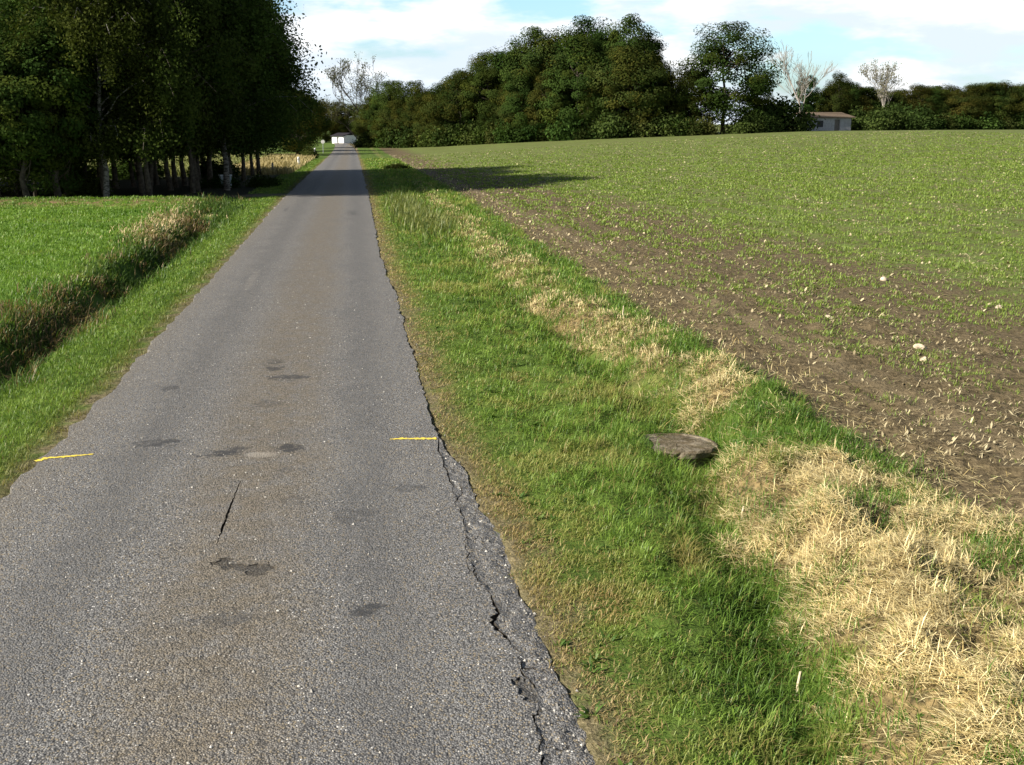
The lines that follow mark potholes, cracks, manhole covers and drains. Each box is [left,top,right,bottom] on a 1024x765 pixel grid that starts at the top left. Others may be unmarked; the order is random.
crack [217,481,241,544]
crack [436,431,548,688]
crack [532,706,570,765]
